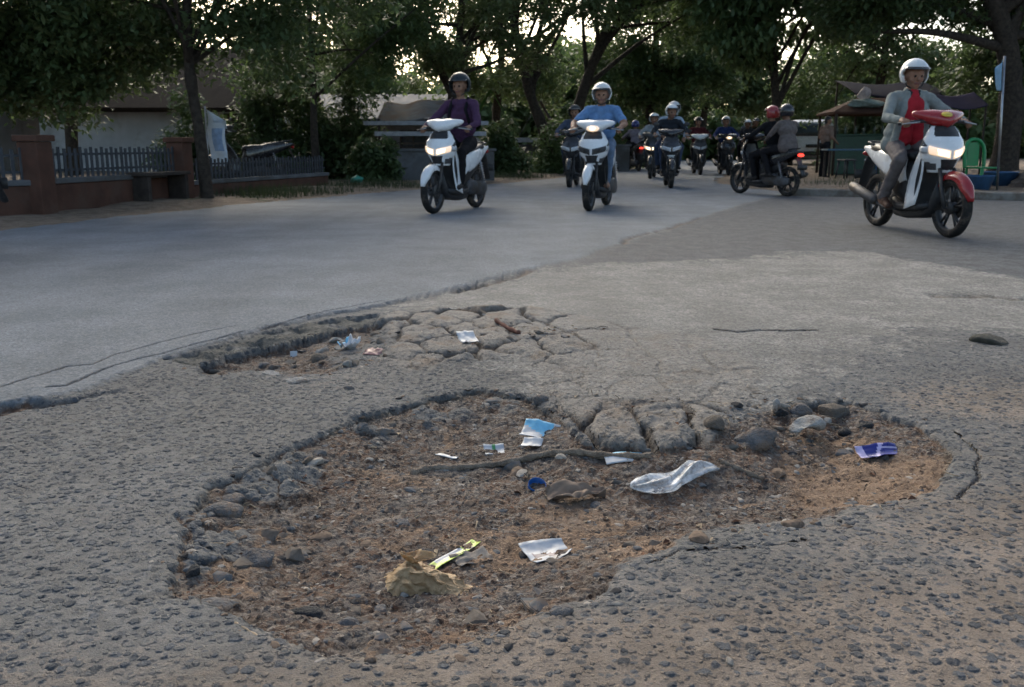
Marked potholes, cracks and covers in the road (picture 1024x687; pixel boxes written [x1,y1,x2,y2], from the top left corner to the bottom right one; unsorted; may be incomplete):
pothole [149,386,963,664]
crack [2,328,242,388]
crack [954,432,982,500]
crack [383,306,760,452]
pothole [188,318,403,382]
